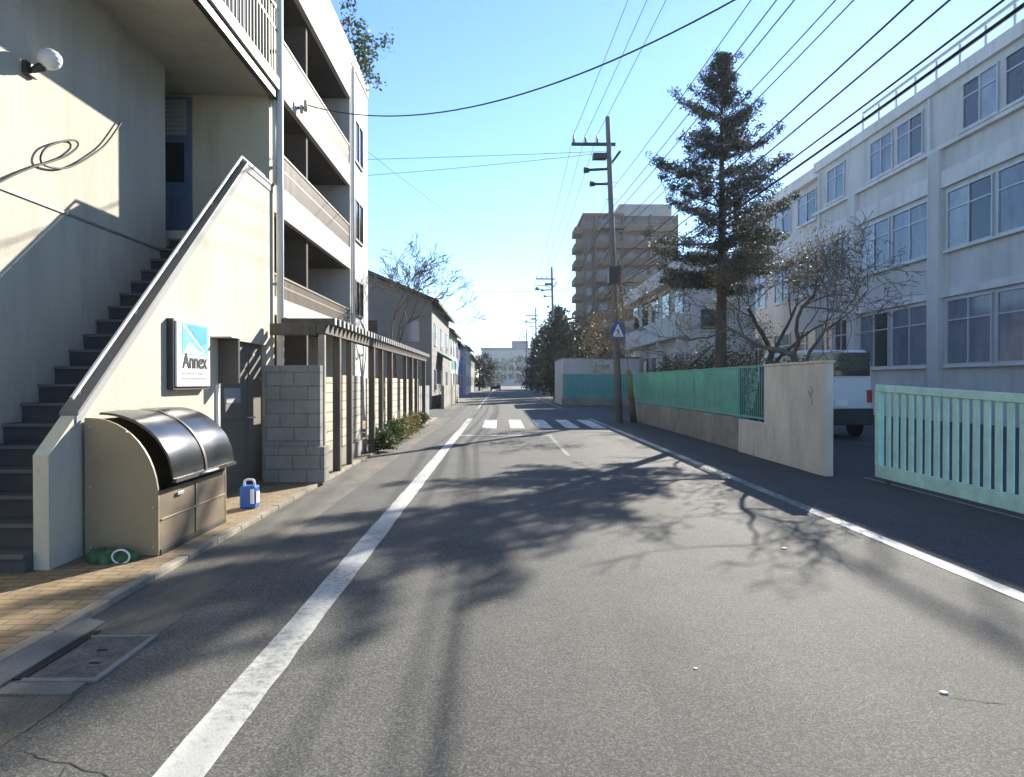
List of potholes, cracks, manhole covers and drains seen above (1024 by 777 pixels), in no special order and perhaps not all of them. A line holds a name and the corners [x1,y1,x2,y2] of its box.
crack [25,749,109,777]
